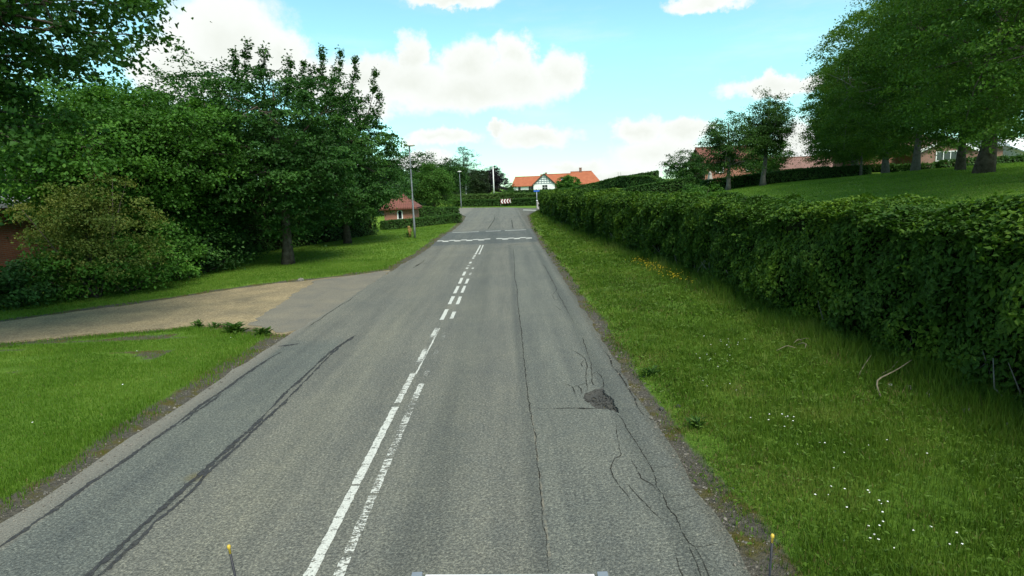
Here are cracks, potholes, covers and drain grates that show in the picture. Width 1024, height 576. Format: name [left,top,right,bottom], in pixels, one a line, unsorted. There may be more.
pothole [583,388,619,413]
crack [505,244,718,576]
